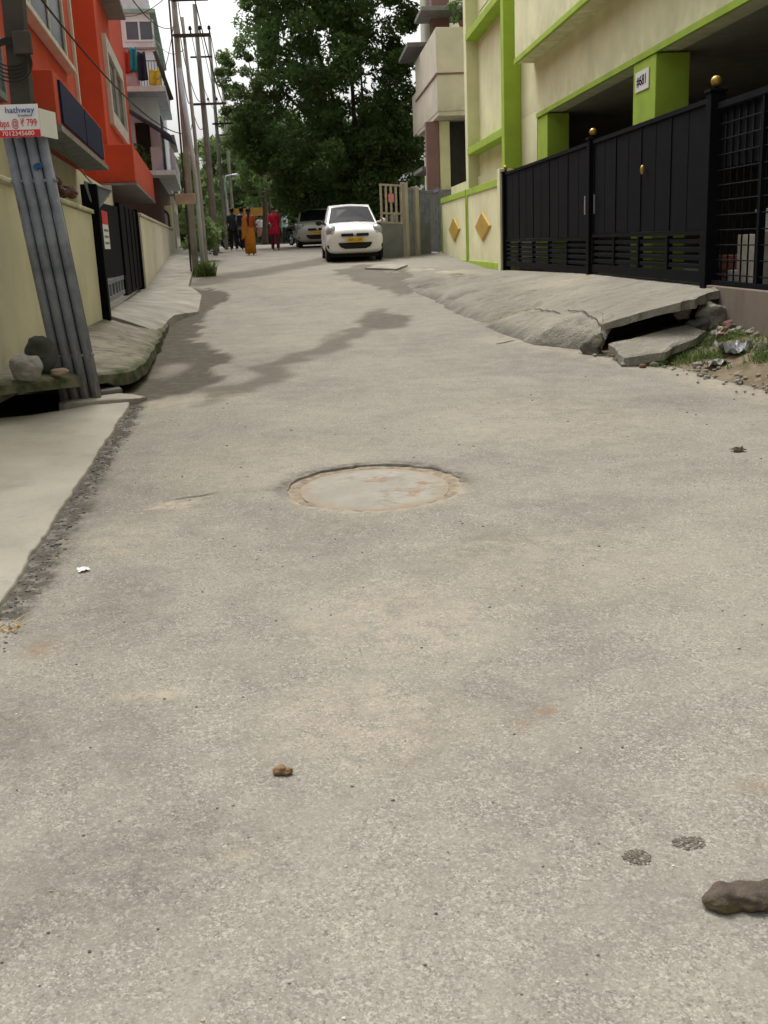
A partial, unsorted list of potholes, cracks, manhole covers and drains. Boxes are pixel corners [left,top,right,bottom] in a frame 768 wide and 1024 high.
manhole cover [287,466,462,513]
